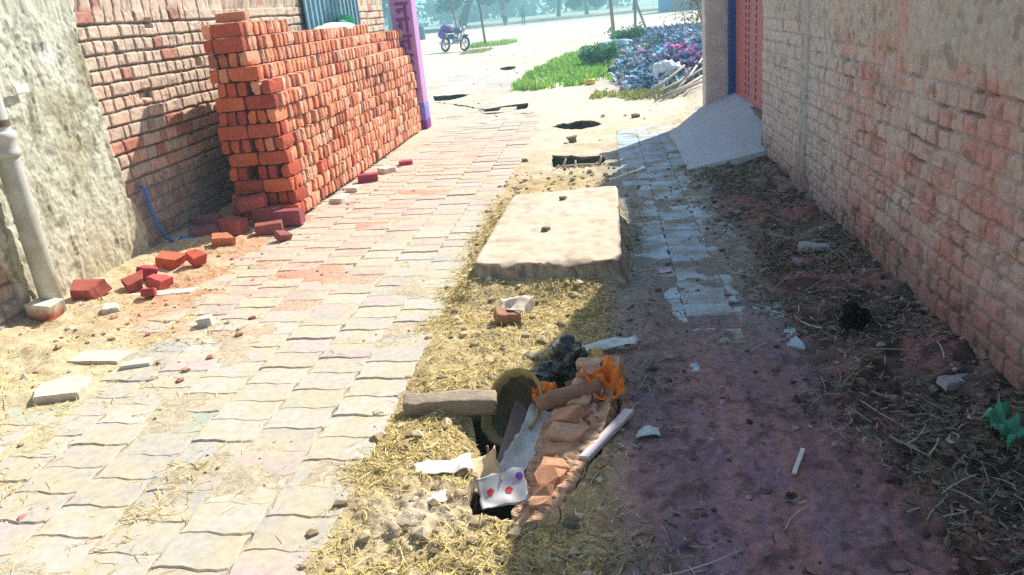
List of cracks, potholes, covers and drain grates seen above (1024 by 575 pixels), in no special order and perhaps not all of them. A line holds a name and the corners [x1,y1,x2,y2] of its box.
pothole [553,120,601,130]
pothole [552,155,605,168]
pothole [467,378,622,520]
pothole [478,103,528,112]
manhole cover [474,186,631,288]
